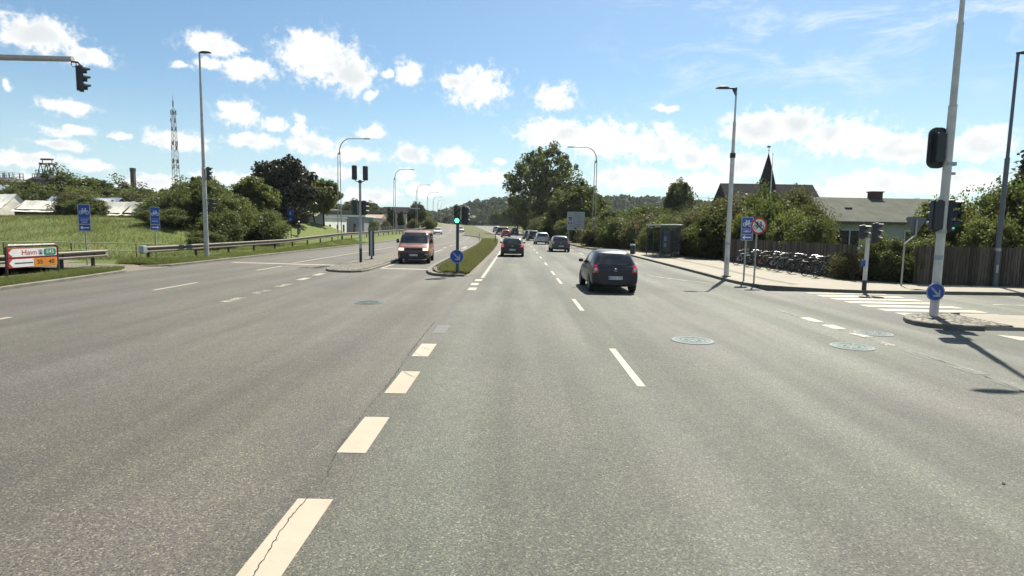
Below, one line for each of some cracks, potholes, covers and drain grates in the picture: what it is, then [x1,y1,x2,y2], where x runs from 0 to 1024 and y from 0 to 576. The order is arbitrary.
manhole cover [829,342,875,351]
manhole cover [670,336,715,345]
